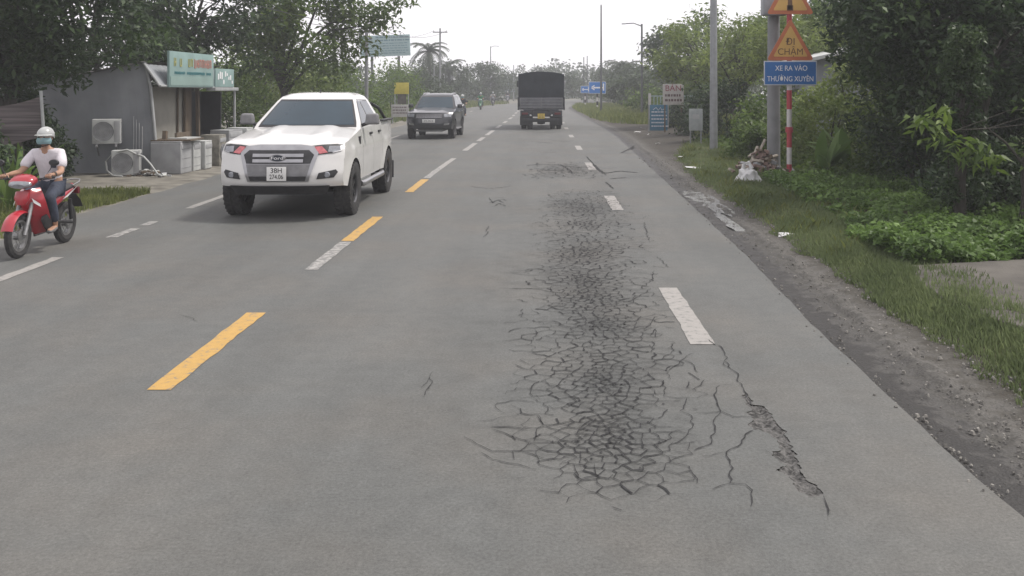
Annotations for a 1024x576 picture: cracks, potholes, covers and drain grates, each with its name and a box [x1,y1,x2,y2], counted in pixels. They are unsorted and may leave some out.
crack [464,132,722,510]
crack [695,340,829,515]
